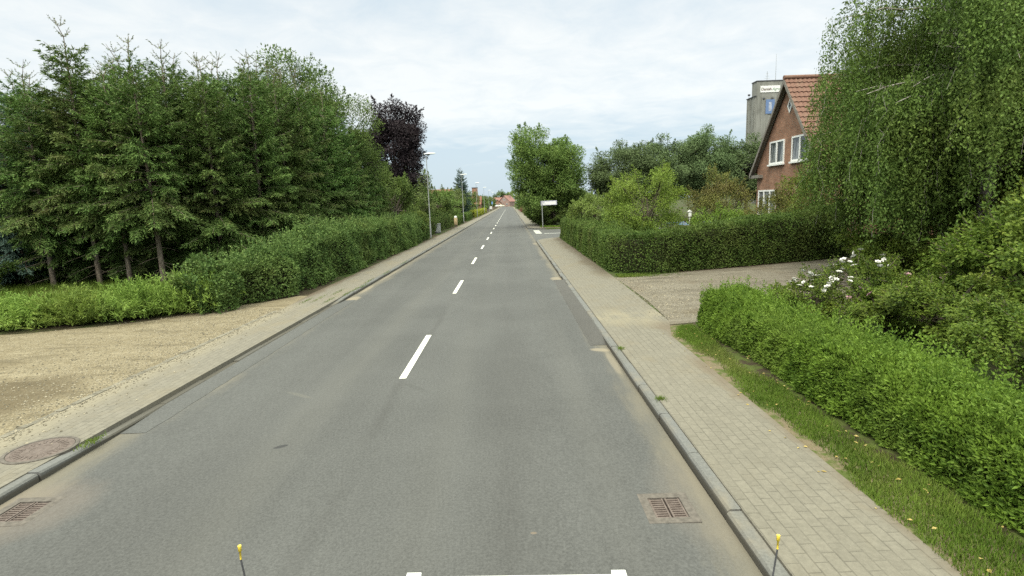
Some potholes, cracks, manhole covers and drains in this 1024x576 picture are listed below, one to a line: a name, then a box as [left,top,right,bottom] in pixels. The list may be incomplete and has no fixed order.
drain grate [0,496,67,527]
manhole cover [0,436,80,465]
drain grate [637,492,702,524]
